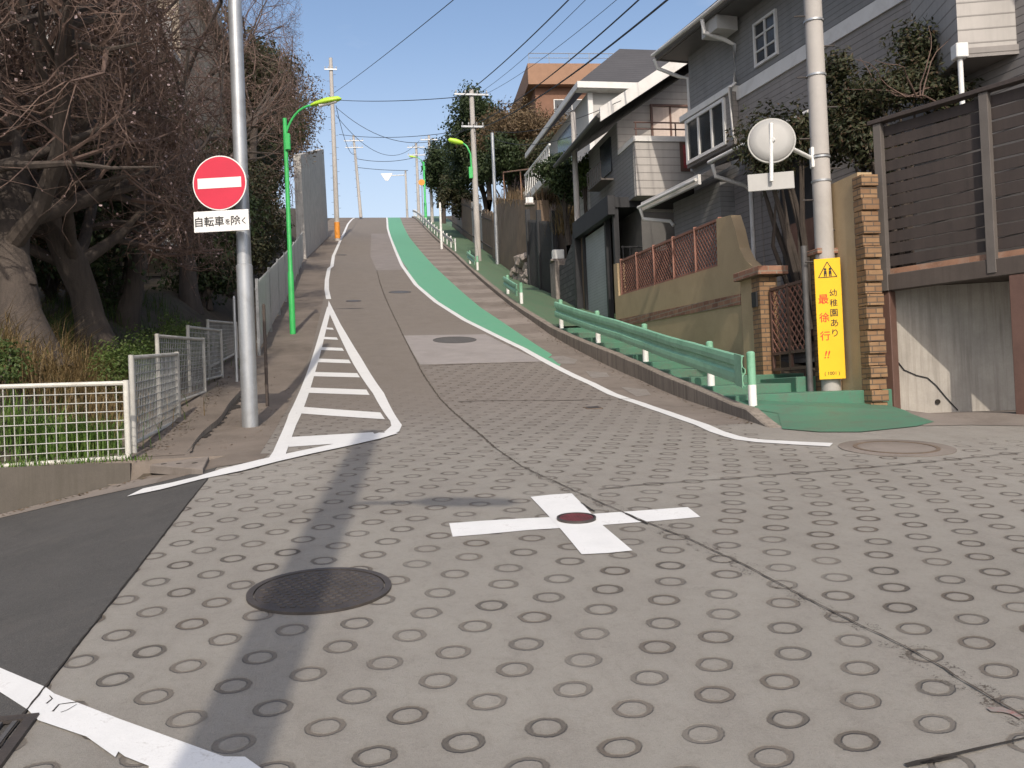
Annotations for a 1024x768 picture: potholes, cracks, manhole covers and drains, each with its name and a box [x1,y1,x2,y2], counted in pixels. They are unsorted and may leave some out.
manhole cover [838,439,957,457]
manhole cover [246,567,392,615]
